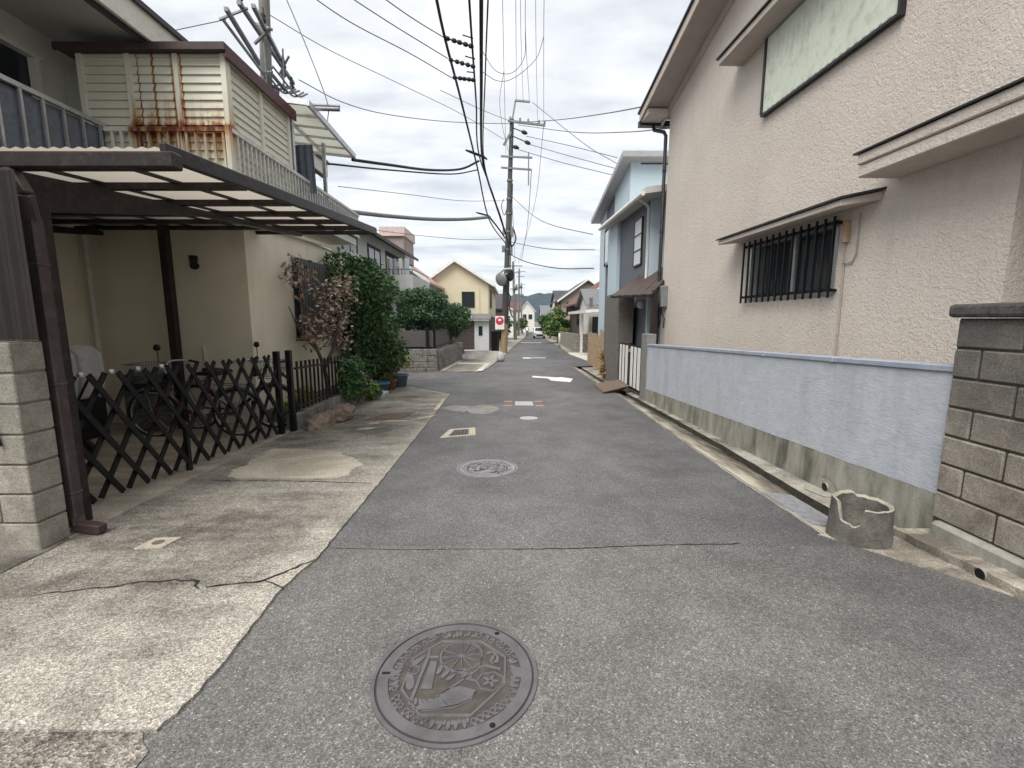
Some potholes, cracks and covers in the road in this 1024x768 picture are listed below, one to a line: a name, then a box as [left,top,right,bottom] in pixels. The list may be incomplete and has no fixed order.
manhole cover [370,621,538,750]
utility cover [134,537,182,550]
crack [38,559,314,595]
manhole cover [457,459,518,478]
